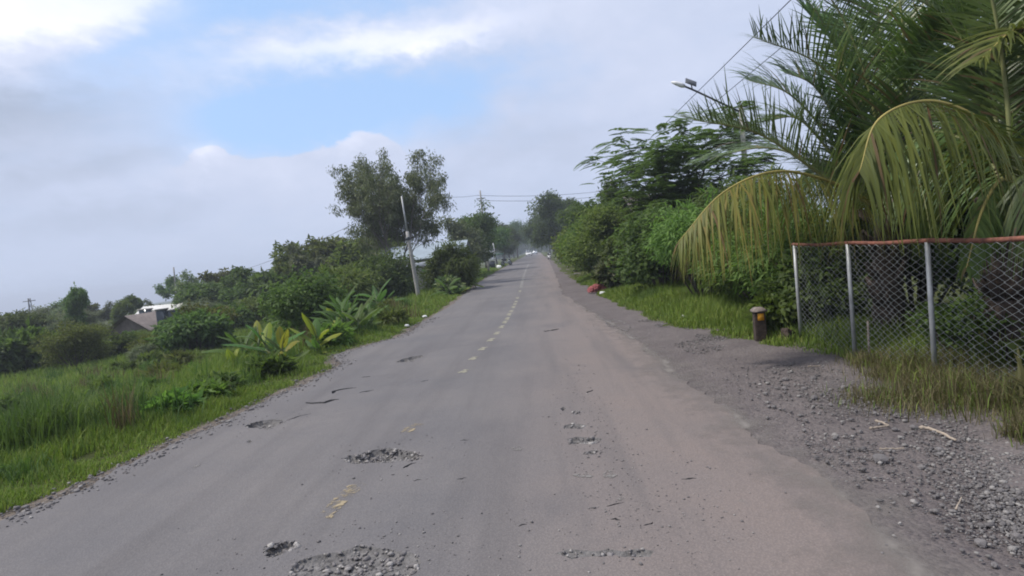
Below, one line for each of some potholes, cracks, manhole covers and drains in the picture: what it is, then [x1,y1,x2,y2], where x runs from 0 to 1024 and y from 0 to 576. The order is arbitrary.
pothole [344,448,423,464]
pothole [555,547,653,559]
pothole [567,436,602,445]
pothole [245,419,284,430]
crack [286,376,372,421]
pothole [263,540,302,558]
pothole [289,544,421,576]
